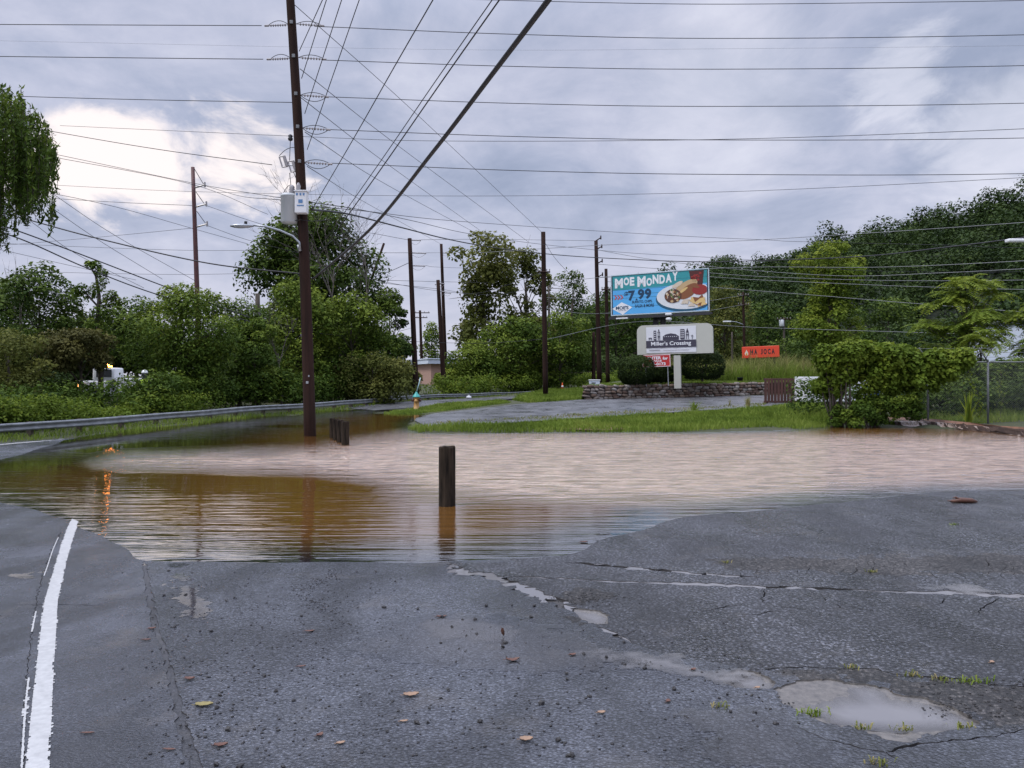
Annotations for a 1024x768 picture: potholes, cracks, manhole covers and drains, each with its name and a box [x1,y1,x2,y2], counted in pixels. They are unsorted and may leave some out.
crack [794,726,1024,758]
crack [446,557,1023,643]
pothole [719,669,776,690]
pothole [773,678,980,742]
